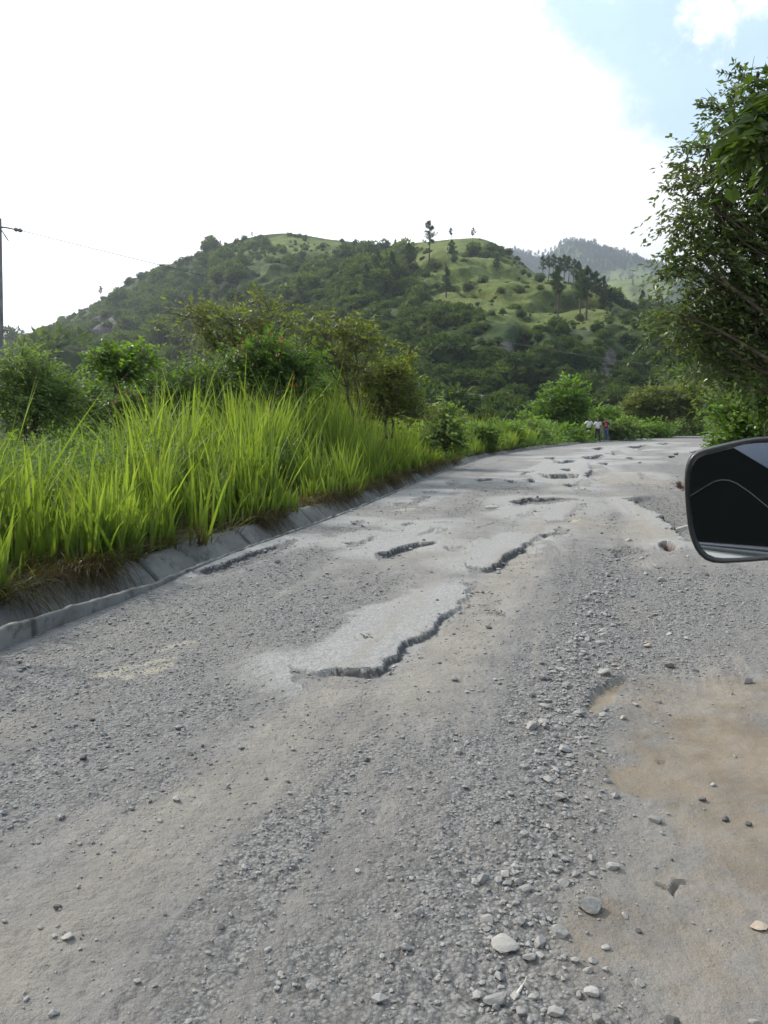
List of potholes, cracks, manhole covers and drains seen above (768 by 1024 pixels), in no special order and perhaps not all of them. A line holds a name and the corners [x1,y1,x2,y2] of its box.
pothole [538,473,583,481]
pothole [374,541,442,562]
pothole [658,541,679,552]
pothole [509,497,585,509]
